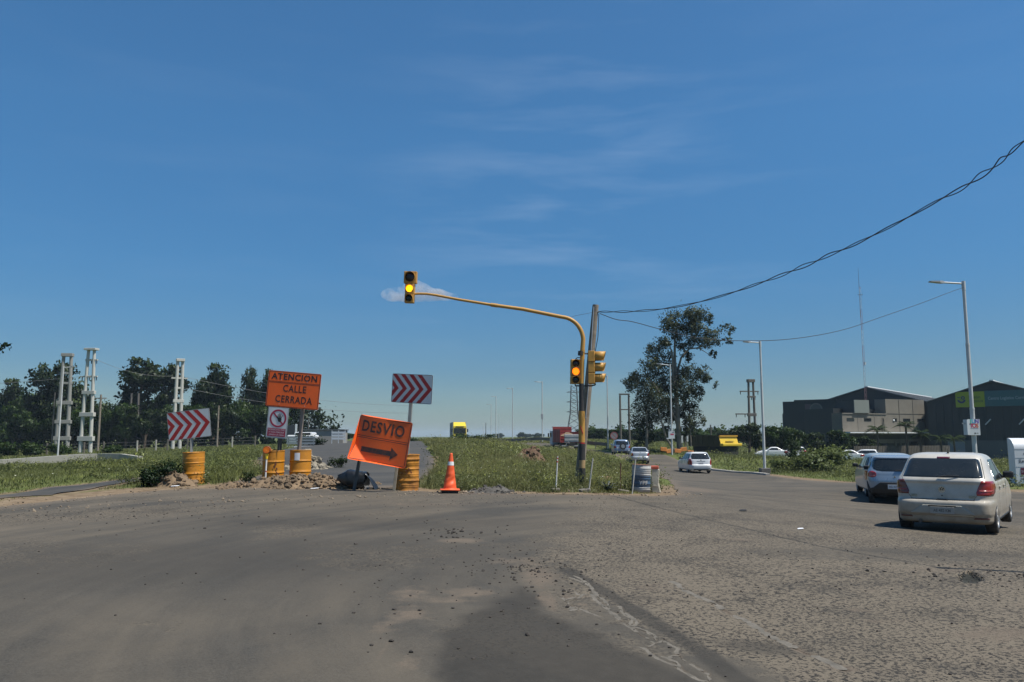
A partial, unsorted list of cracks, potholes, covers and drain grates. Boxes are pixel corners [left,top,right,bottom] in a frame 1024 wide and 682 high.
pothole [957,570,985,583]
crack [562,575,848,682]
